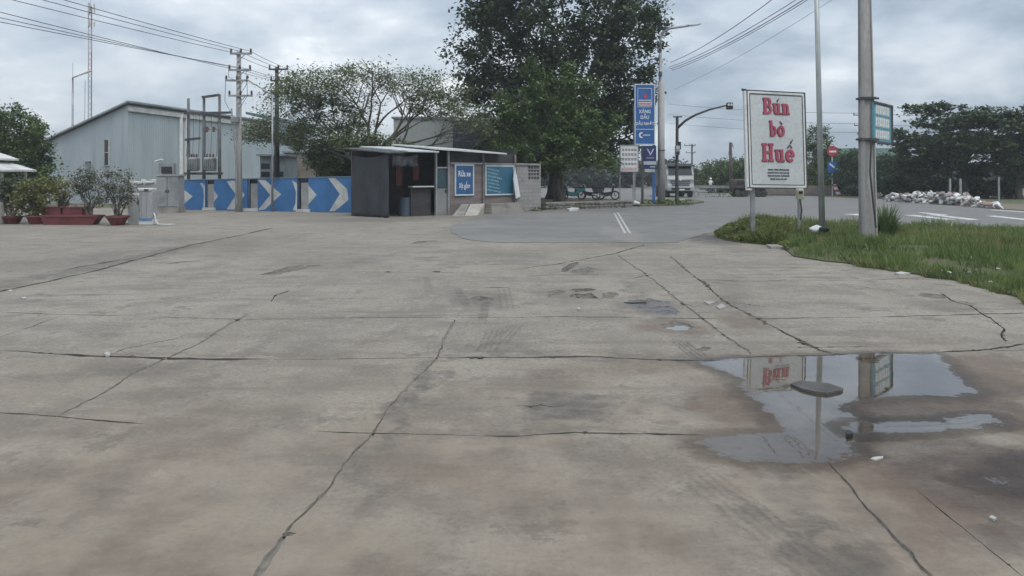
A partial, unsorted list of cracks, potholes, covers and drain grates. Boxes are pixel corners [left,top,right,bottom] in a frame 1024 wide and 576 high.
crack [253,245,1023,576]
pothole [659,321,694,331]
crack [1,290,290,417]
pothole [625,298,679,316]
